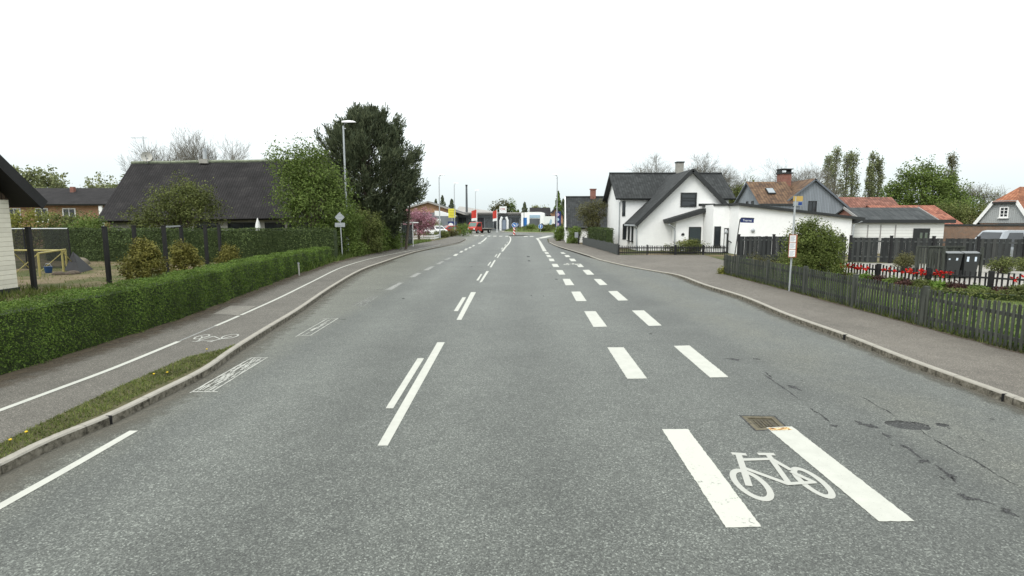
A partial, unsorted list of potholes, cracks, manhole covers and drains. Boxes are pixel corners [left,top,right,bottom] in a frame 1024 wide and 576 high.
crack [725,358,838,427]
crack [856,396,1022,517]
